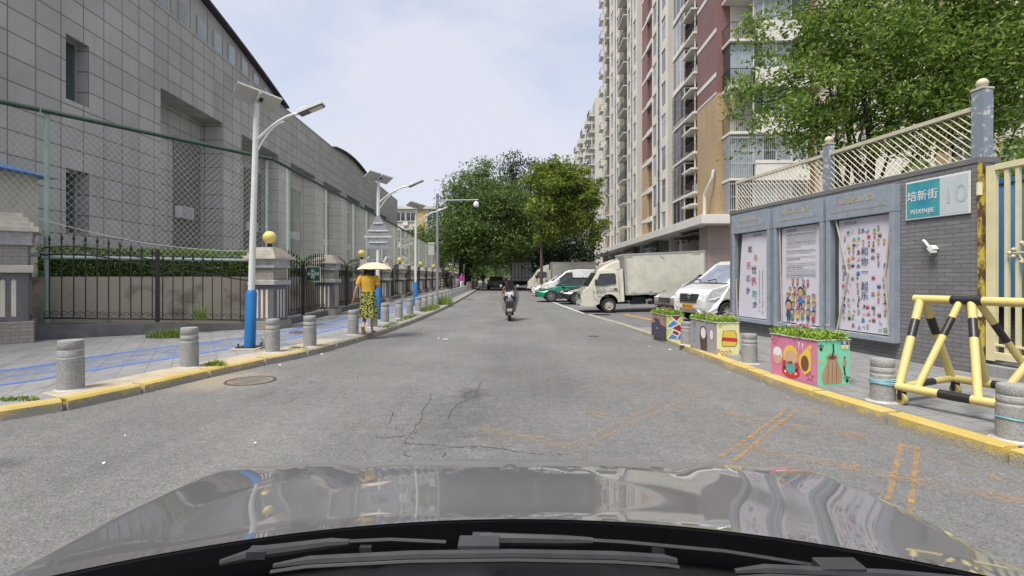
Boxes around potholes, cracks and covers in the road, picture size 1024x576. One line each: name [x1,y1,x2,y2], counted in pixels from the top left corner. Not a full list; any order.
manhole cover [223,376,277,386]
crack [376,383,543,457]
